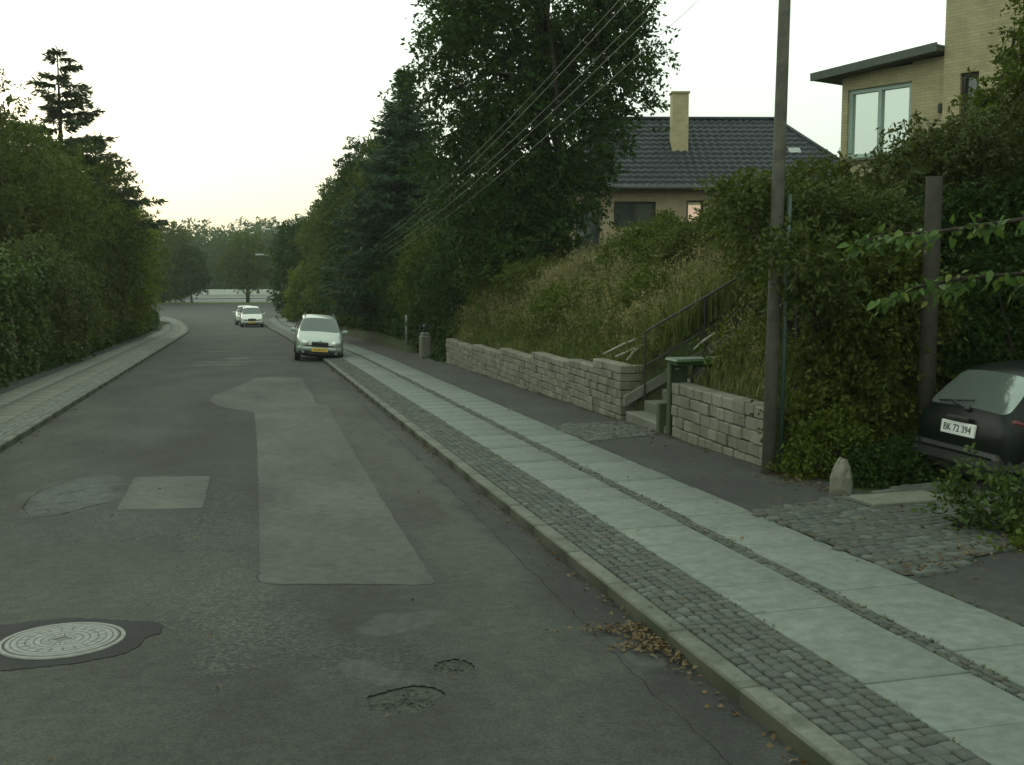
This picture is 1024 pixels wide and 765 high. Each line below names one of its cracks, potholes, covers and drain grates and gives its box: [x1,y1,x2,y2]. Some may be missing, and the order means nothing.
crack [345,385,731,765]
pothole [363,683,446,715]
manhole cover [0,622,126,660]
pothole [433,657,478,675]
